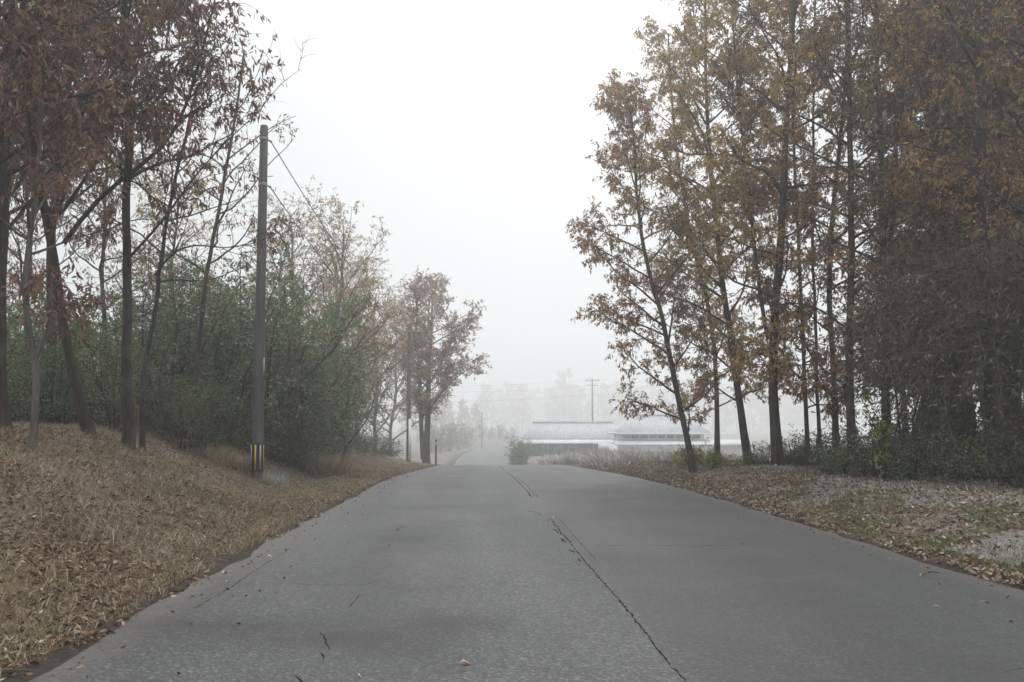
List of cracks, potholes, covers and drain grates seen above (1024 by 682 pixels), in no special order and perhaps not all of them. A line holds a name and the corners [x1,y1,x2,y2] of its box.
crack [530,511,745,682]
